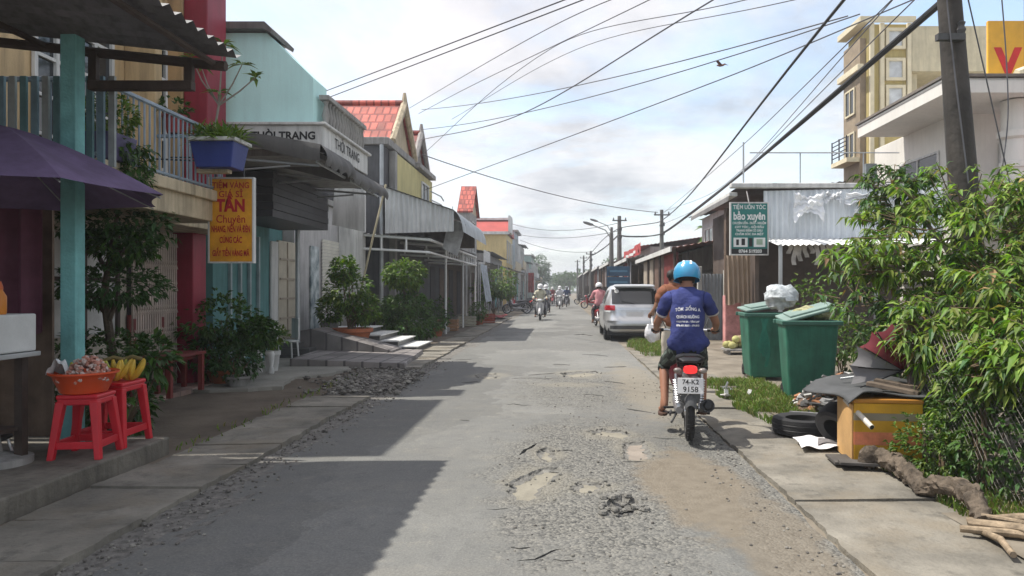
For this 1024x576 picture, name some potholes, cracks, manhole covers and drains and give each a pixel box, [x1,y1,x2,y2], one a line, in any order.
pothole [569,480,611,494]
pothole [621,441,655,461]
pothole [536,447,560,463]
crack [511,547,574,562]
pothole [598,493,650,517]
pothole [586,426,632,440]
pothole [505,467,563,501]
